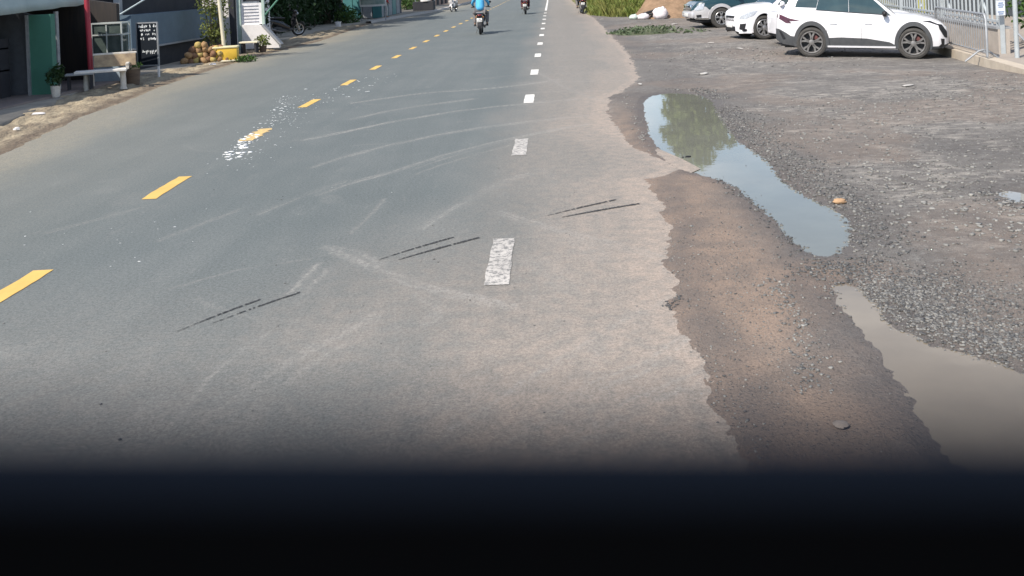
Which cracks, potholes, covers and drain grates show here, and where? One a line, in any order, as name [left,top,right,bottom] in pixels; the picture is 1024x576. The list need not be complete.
pothole [635,91,869,260]
pothole [814,275,1024,412]
pothole [986,186,1024,204]
